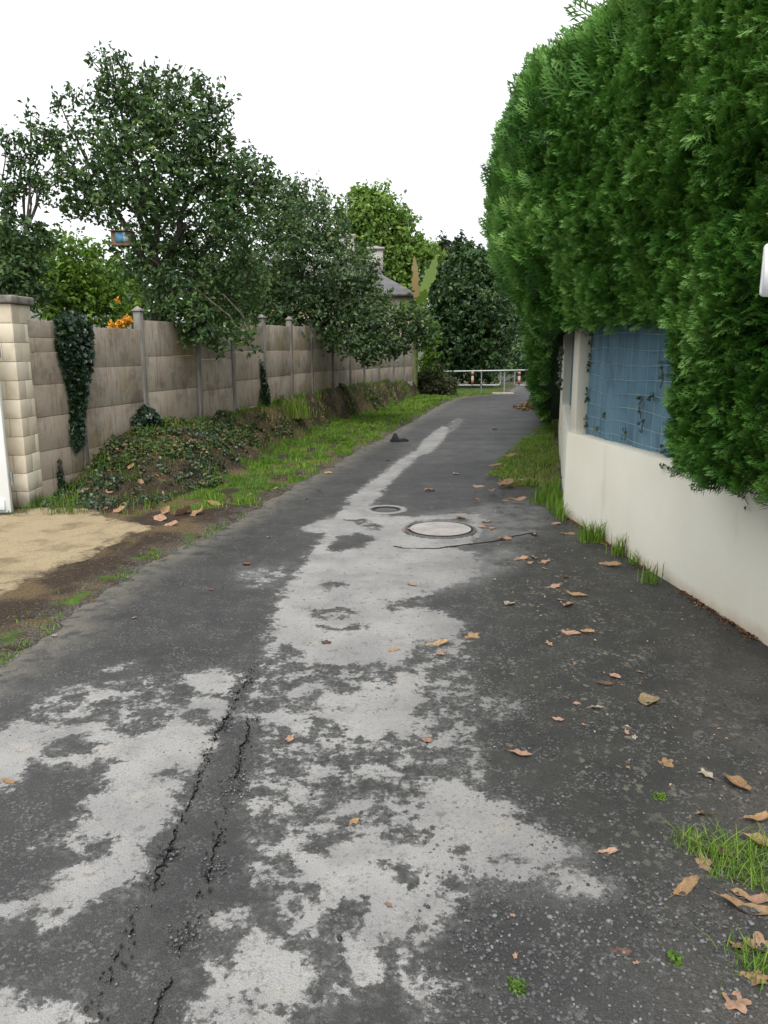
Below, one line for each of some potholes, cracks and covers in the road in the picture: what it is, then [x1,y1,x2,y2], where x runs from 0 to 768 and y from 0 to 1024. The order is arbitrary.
manhole cover [364,505,408,514]
crack [84,662,262,1024]
manhole cover [405,521,476,539]
